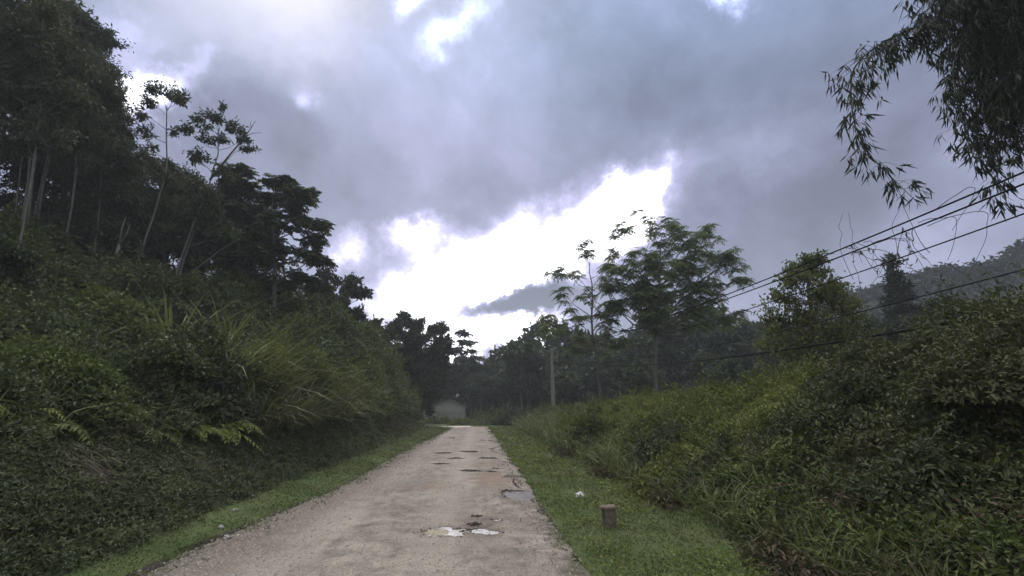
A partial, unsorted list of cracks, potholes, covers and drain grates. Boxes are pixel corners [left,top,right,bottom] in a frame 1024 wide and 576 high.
pothole [459,527,504,536]
pothole [412,525,478,538]
pothole [498,488,536,503]
